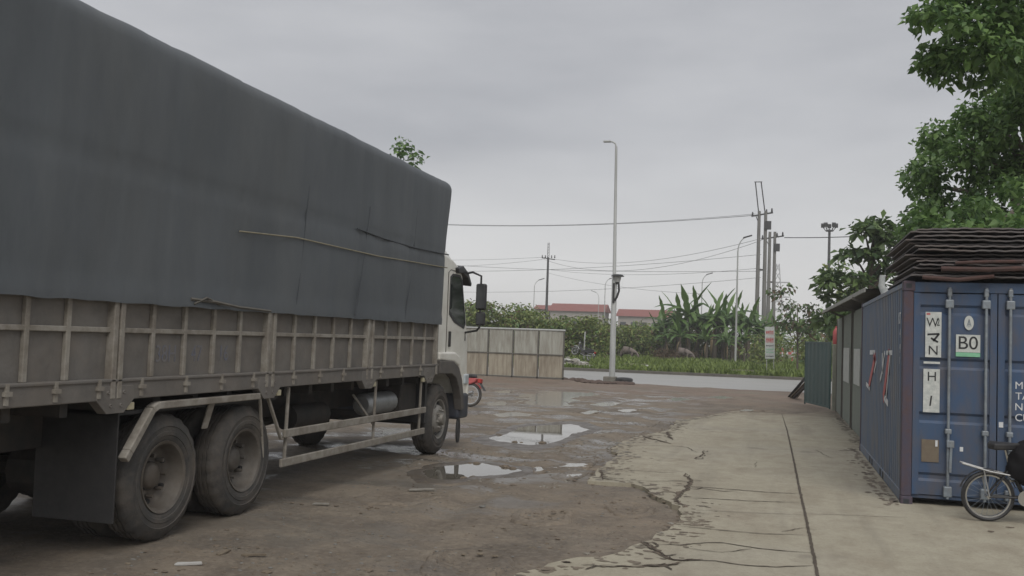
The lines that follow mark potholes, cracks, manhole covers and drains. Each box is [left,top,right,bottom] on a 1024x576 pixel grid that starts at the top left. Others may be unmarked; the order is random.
crack [582,431,815,569]
pothole [406,460,536,484]
pothole [471,421,604,451]
pothole [498,388,615,413]
